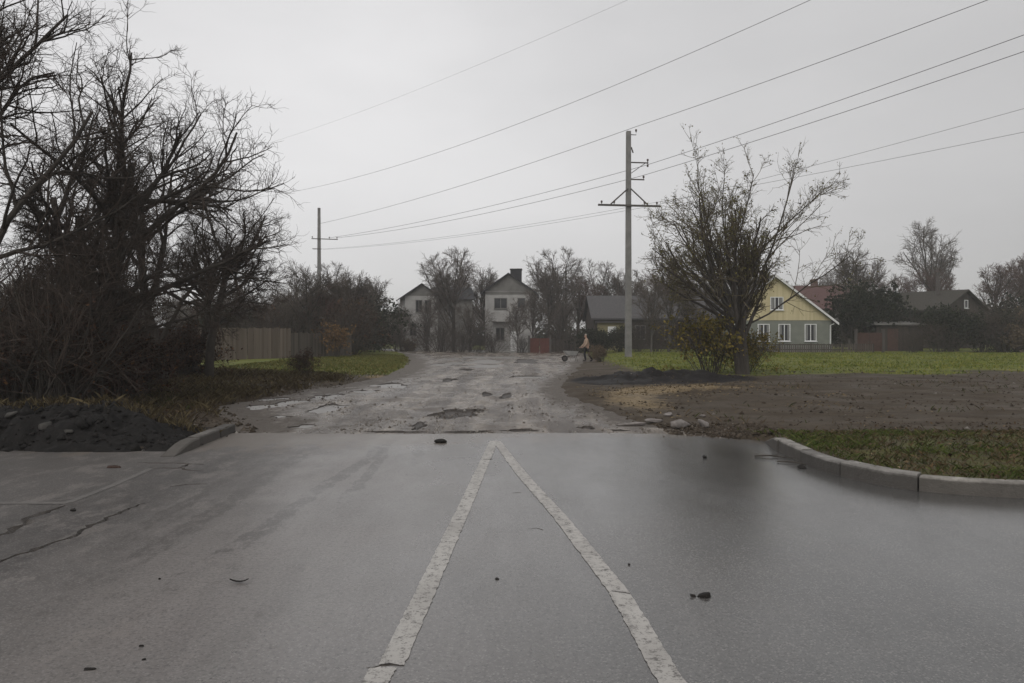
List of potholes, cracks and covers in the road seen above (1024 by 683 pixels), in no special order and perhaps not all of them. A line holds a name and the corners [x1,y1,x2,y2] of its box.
crack [144,462,204,487]
pothole [425,409,485,419]
crack [0,503,144,563]
